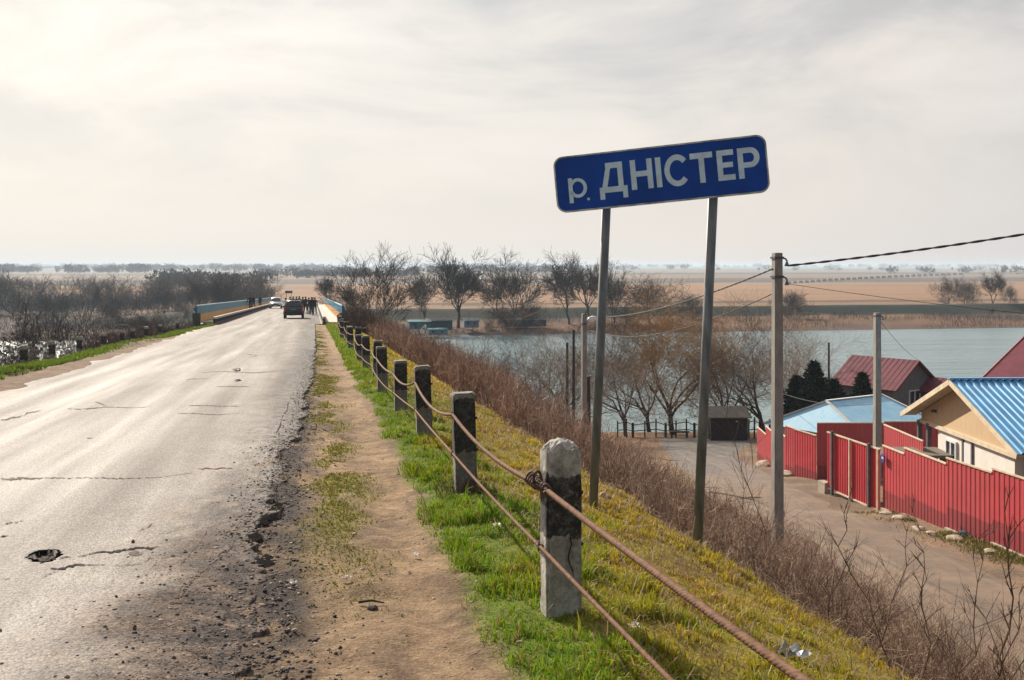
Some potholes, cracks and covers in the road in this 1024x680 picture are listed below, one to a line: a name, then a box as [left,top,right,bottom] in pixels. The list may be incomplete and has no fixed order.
pothole [256,554,274,567]
crack [41,523,239,603]
crack [186,354,273,387]
pothole [25,549,64,563]
crack [0,467,228,480]
